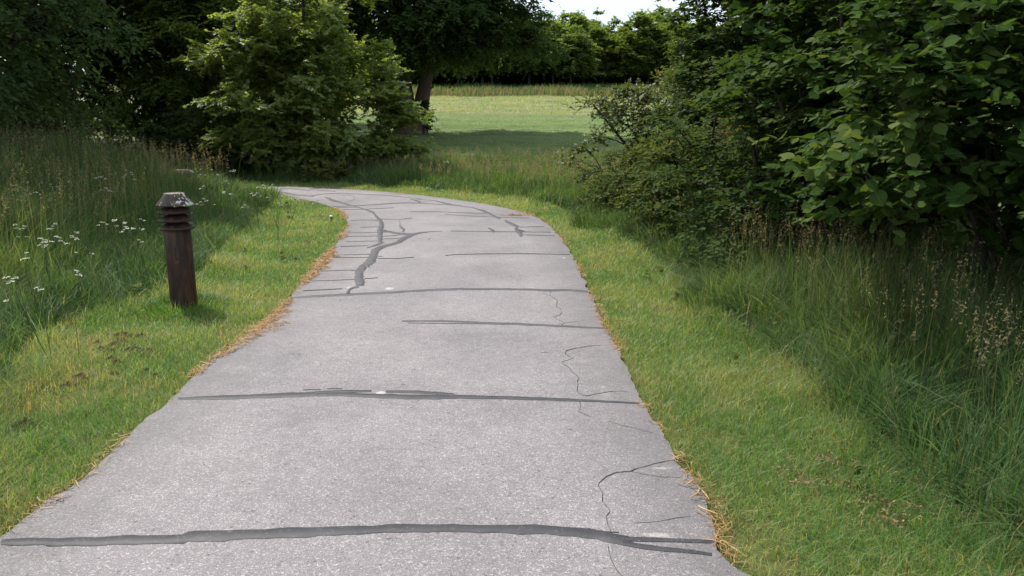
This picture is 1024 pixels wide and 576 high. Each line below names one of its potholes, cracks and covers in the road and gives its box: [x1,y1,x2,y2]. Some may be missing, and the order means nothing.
crack [598,459,690,576]
crack [541,345,653,433]
